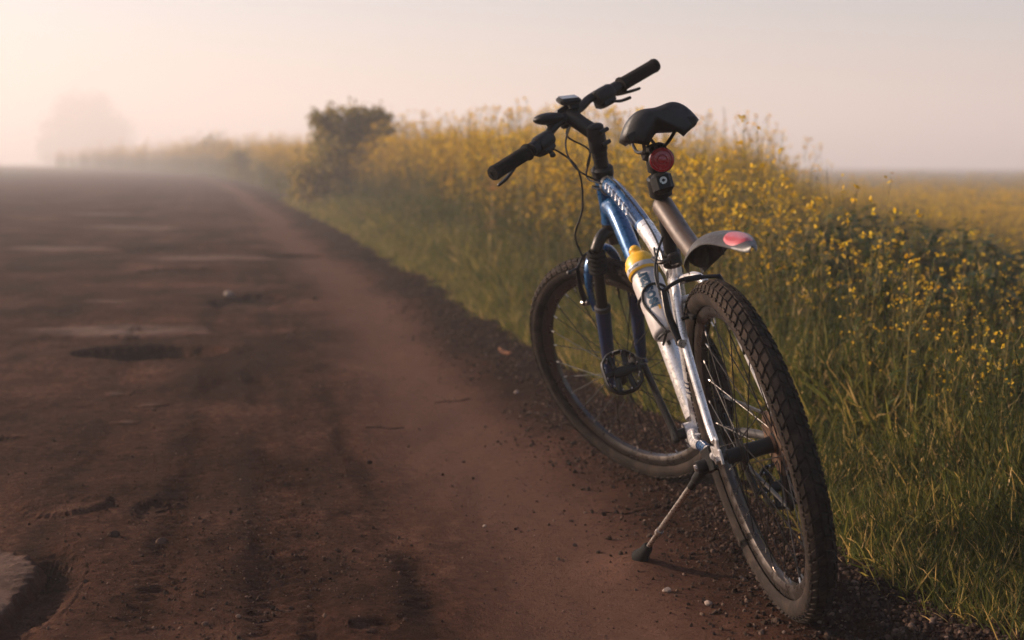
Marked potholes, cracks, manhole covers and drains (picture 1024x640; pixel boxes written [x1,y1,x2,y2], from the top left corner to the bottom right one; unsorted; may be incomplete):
pothole [132,498,172,523]
pothole [0,546,90,640]
pothole [76,345,226,362]
pothole [201,294,293,309]
